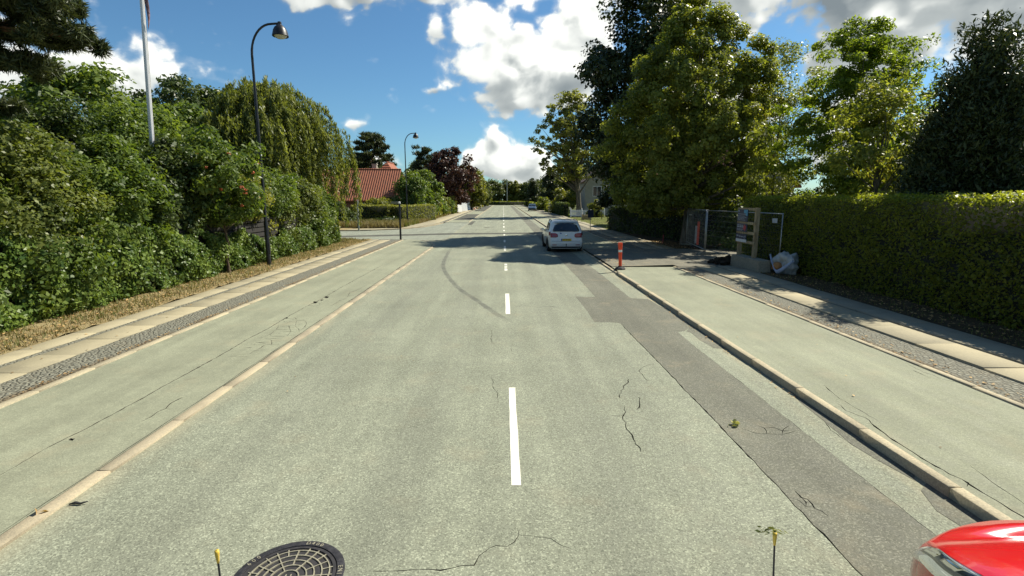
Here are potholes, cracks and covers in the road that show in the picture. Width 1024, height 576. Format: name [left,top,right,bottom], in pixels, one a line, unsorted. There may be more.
crack [613,364,651,452]
manhole cover [234,541,345,576]
crack [398,528,566,571]
